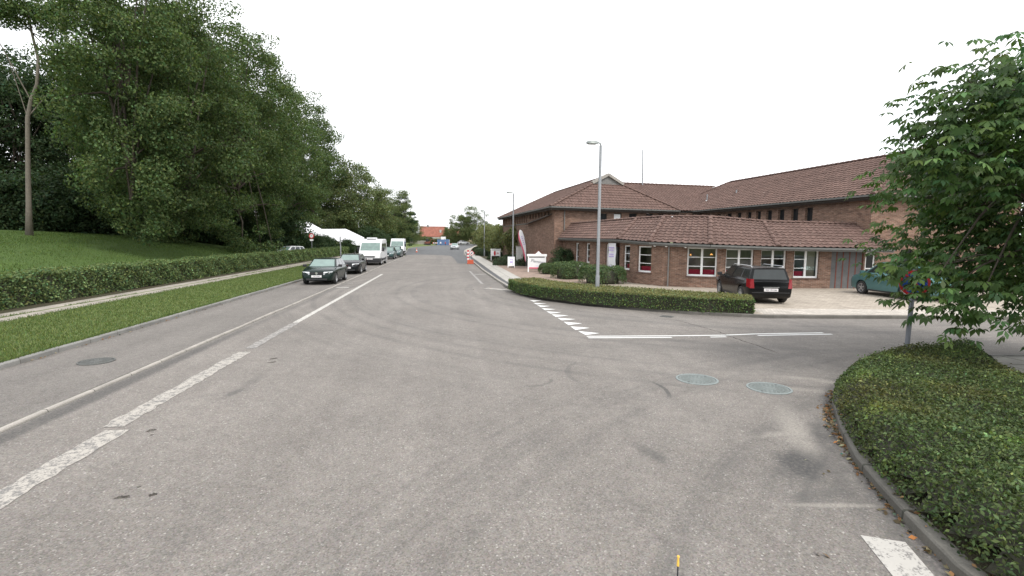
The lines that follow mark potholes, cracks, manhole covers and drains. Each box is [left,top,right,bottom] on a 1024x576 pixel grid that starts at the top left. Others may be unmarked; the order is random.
manhole cover [676,374,719,385]
manhole cover [746,382,793,395]
manhole cover [76,357,116,366]
